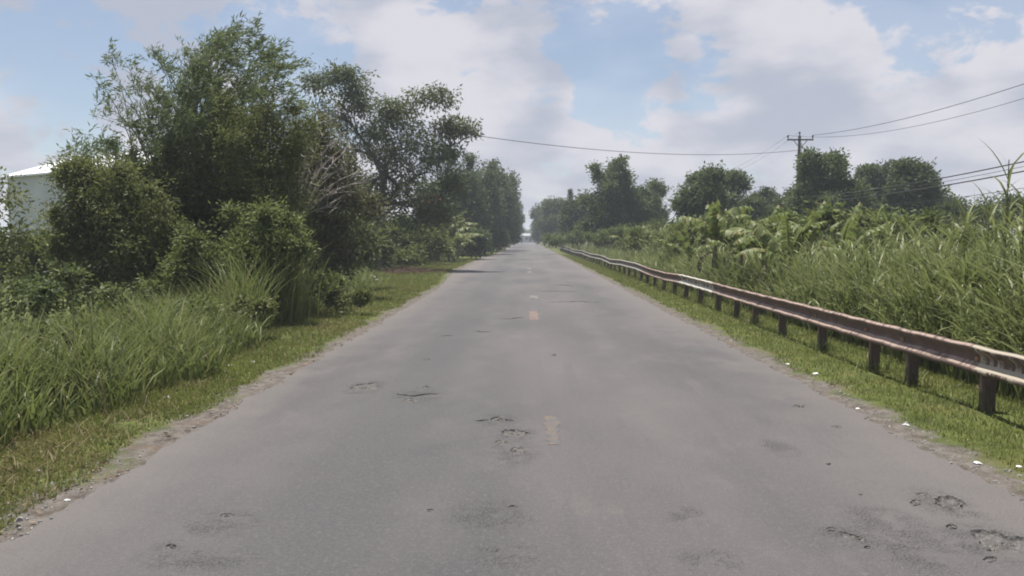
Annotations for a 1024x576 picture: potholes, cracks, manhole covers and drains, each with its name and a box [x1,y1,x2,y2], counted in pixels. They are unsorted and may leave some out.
pothole [970,529,1024,554]
pothole [934,495,966,511]
pothole [350,382,380,391]
pothole [839,531,867,542]
pothole [501,429,531,438]
